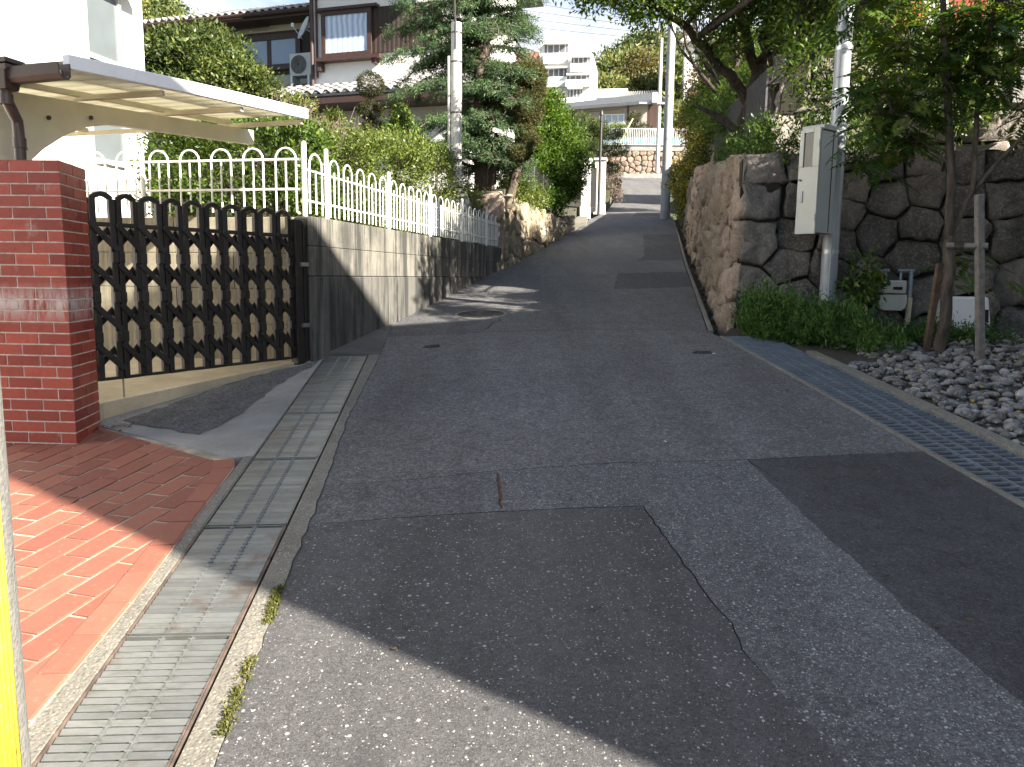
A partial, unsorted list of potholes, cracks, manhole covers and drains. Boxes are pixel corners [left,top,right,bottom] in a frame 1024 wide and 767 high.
manhole cover [455,310,507,319]
crack [337,451,912,678]
